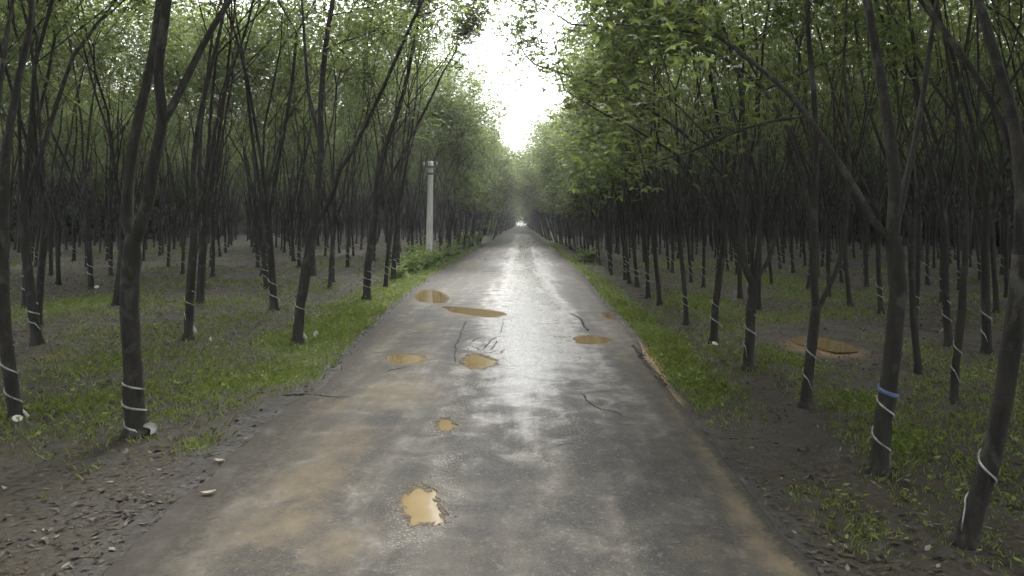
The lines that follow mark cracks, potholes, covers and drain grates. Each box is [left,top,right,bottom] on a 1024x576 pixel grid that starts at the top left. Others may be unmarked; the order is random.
pothole [573,335,614,344]
pothole [385,353,429,364]
pothole [440,306,508,318]
pothole [413,289,450,303]
pothole [388,478,457,535]
crack [453,318,505,364]
pothole [451,352,504,371]
pothole [433,415,464,436]
